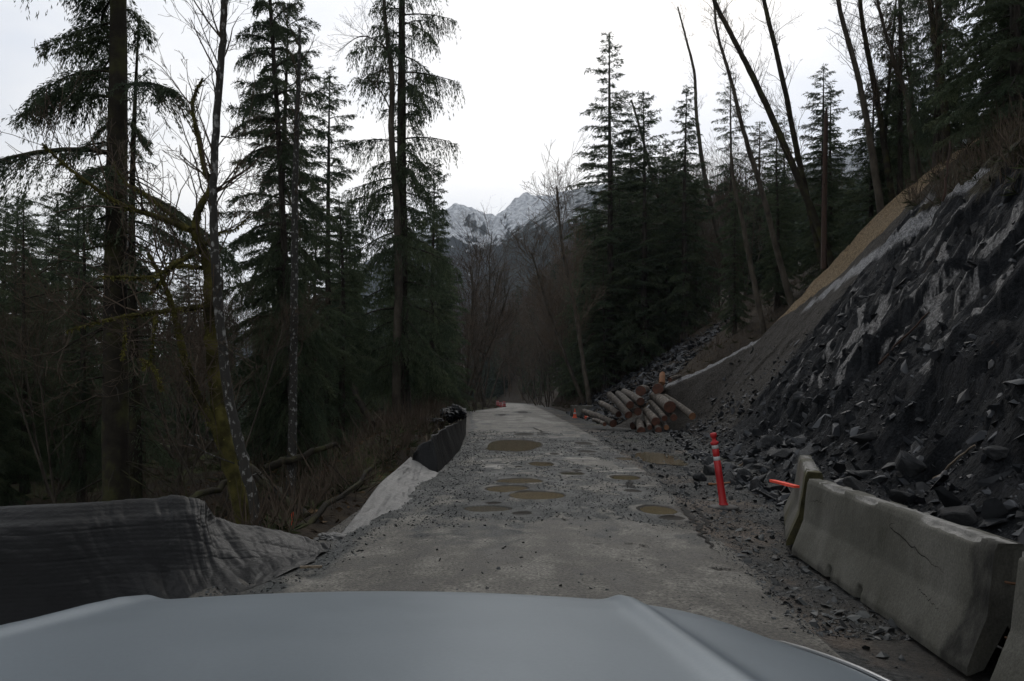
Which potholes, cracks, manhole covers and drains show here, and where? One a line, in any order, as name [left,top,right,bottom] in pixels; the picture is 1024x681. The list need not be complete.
pothole [485,439,543,452]
pothole [508,490,566,499]
pothole [636,505,678,515]
